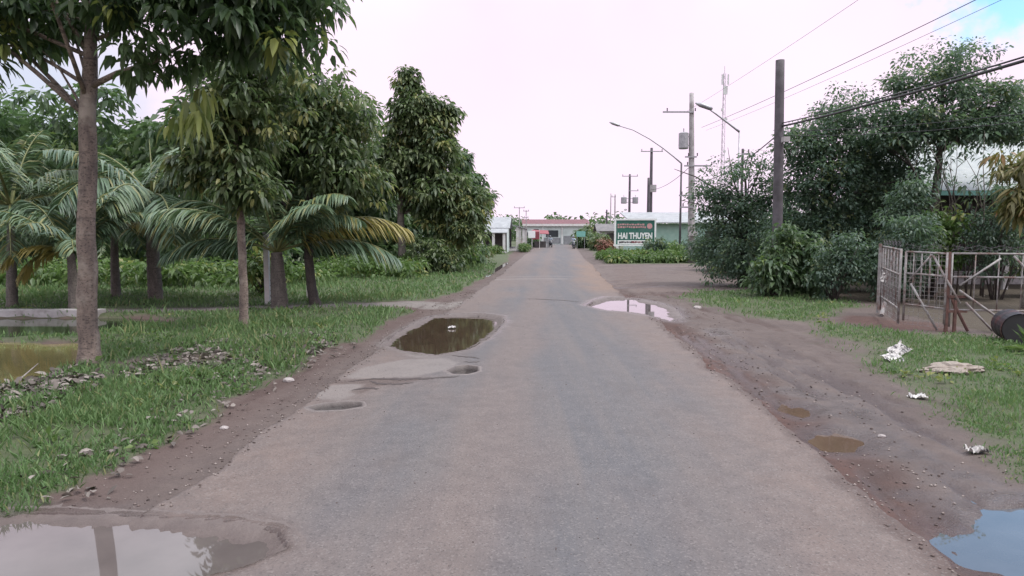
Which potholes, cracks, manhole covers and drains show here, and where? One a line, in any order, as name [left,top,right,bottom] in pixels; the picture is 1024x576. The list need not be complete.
pothole [582,297,683,321]
pothole [377,313,507,356]
pothole [0,503,306,576]
pothole [443,364,483,375]
pothole [304,400,367,412]
